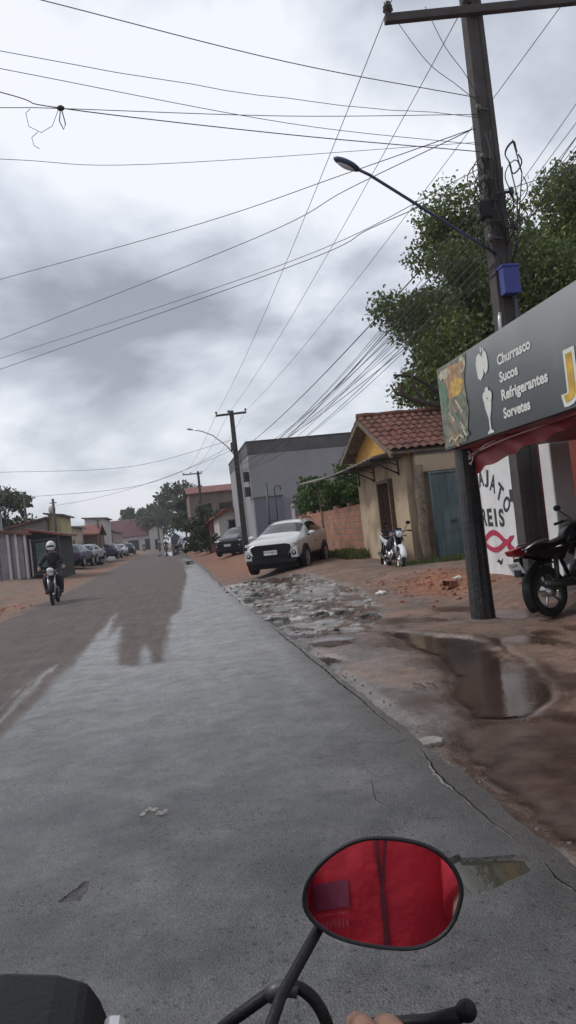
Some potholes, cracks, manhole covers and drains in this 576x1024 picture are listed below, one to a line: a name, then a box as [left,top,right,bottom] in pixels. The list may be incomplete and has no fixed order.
pothole [449,854,538,895]
pothole [310,611,330,620]
crack [543,862,576,893]
crack [357,738,522,853]
pothole [357,613,382,623]
pothole [59,880,90,902]
pothole [264,617,291,627]
pothole [334,609,356,619]
